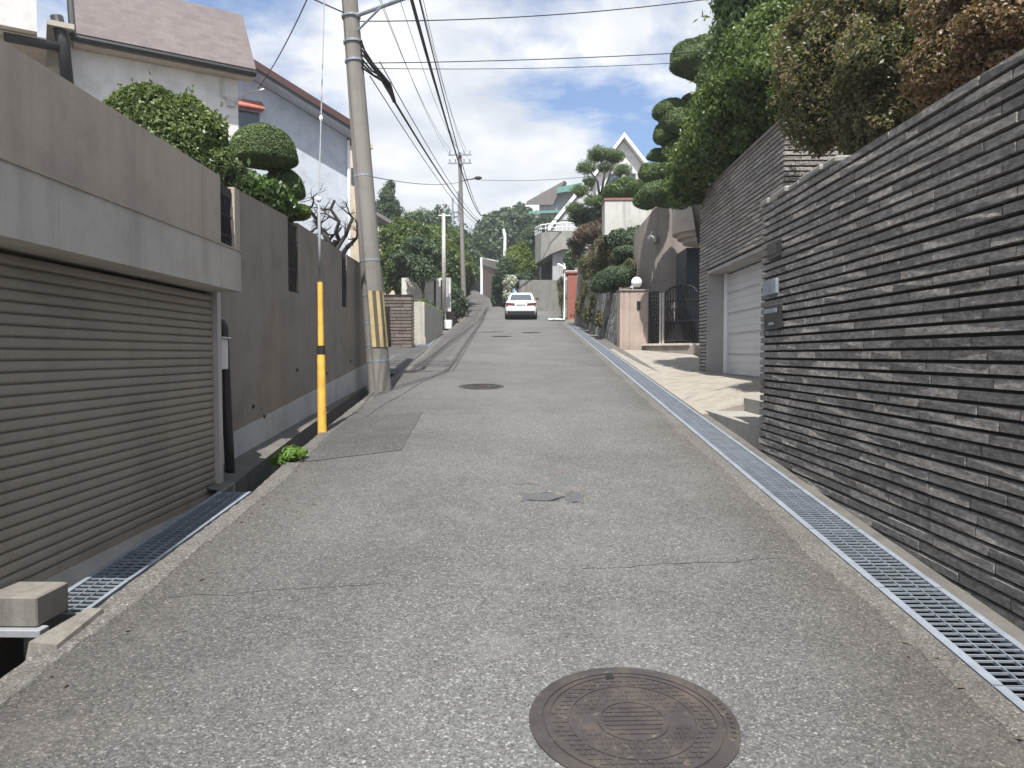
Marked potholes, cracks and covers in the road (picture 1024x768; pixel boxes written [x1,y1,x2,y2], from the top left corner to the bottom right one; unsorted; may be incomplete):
drain grate [668,410,711,424]
drain grate [175,491,251,525]
drain grate [728,461,804,490]
drain grate [116,520,212,562]
crack [582,557,808,569]
crack [158,583,383,599]
drain grate [808,529,942,593]
manhole cover [529,667,741,768]
drain grate [703,440,764,462]
drain grate [878,588,1024,688]
drain grate [655,399,693,411]
